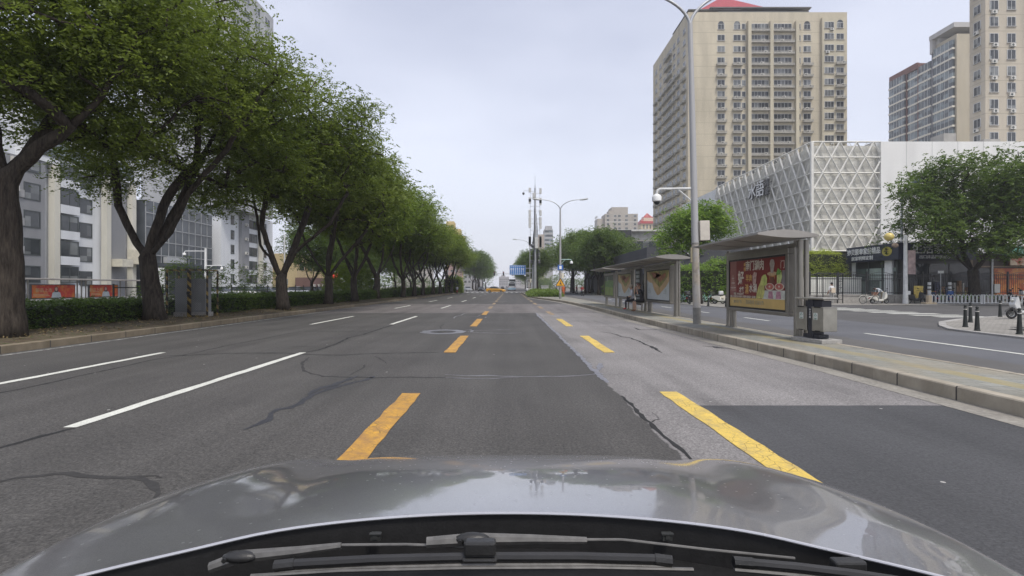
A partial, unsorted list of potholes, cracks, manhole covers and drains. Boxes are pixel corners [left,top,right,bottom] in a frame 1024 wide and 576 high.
crack [0,471,162,498]
crack [0,325,445,430]
crack [606,328,662,353]
